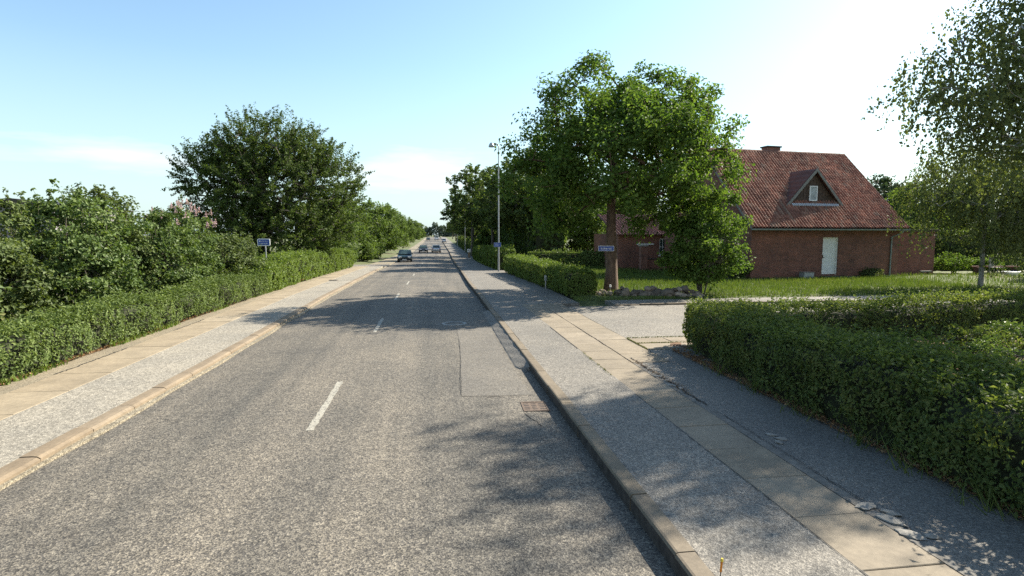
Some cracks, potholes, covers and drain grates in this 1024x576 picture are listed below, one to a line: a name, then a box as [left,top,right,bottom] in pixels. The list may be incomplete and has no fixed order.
drain grate [520,401,550,412]
